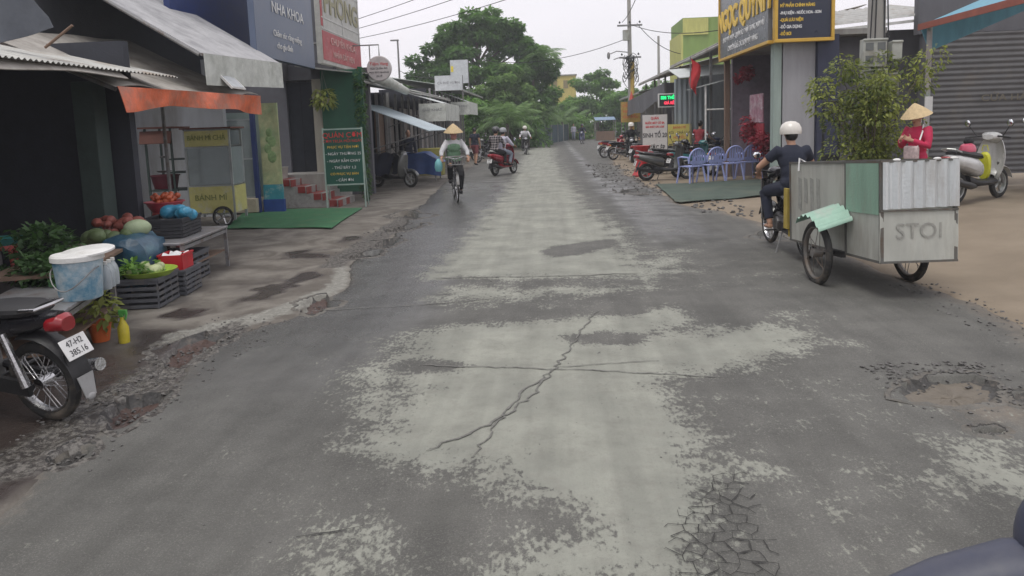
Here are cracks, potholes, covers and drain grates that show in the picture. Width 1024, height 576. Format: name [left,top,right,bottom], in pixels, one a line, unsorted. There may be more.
pothole [88,386,180,438]
pothole [141,330,240,374]
pothole [961,422,1017,440]
pothole [884,369,1013,411]
crack [424,310,728,458]
crack [664,472,780,576]
pothole [289,293,349,317]
